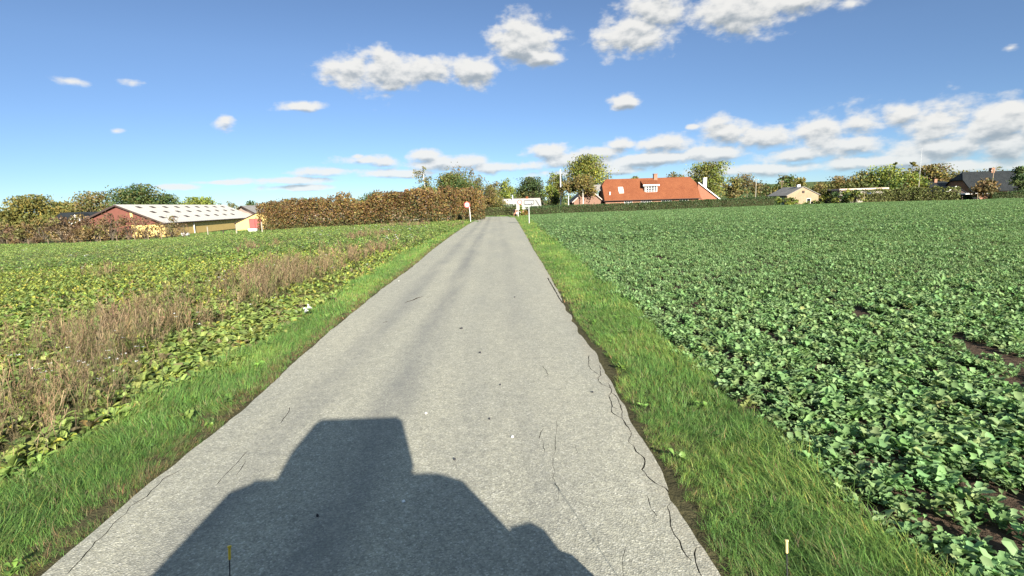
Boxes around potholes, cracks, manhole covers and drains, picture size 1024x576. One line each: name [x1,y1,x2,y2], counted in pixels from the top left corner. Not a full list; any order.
crack [68,470,180,573]
crack [588,356,701,575]
